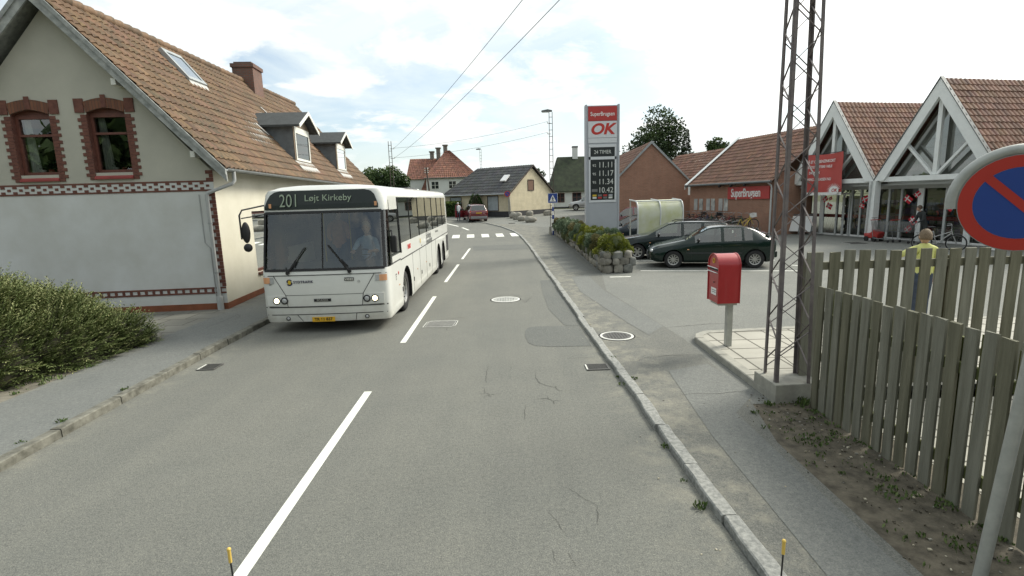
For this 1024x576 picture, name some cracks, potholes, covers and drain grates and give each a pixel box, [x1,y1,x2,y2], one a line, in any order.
drain grate [584,363,610,371]
manhole cover [598,331,635,341]
drain grate [196,363,224,371]
